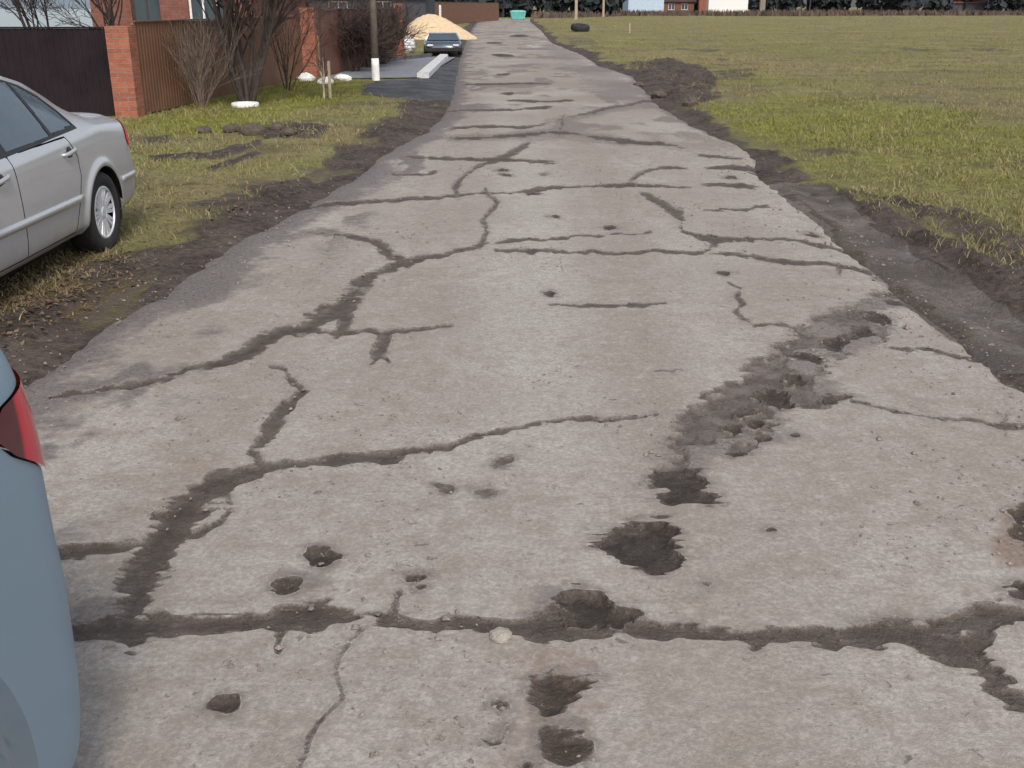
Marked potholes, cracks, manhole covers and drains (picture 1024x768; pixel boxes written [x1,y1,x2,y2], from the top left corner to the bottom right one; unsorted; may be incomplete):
pothole [550,583,645,630]
crack [57,364,1024,713]
pothole [755,386,796,410]
crack [888,346,977,363]
crack [447,99,684,149]
pothole [587,515,687,576]
pothole [524,668,600,722]
crack [704,164,756,175]
pothole [783,352,824,365]
pothole [746,418,765,430]
pothole [822,334,861,353]
crack [46,142,693,399]
